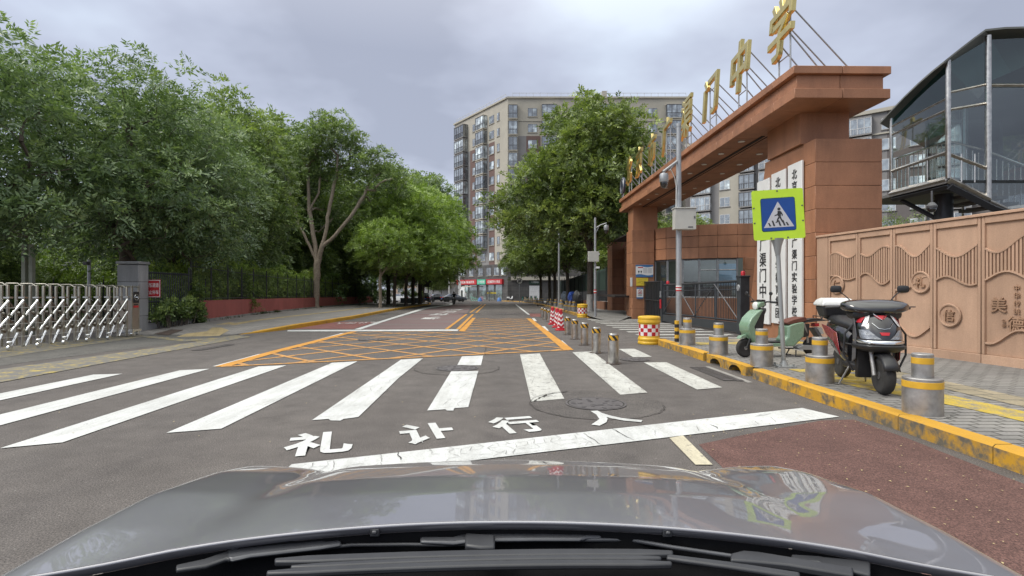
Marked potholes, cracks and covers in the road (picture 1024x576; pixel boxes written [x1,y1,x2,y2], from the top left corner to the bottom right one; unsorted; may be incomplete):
manhole cover [565,397,627,410]
drain grate [690,367,734,381]
